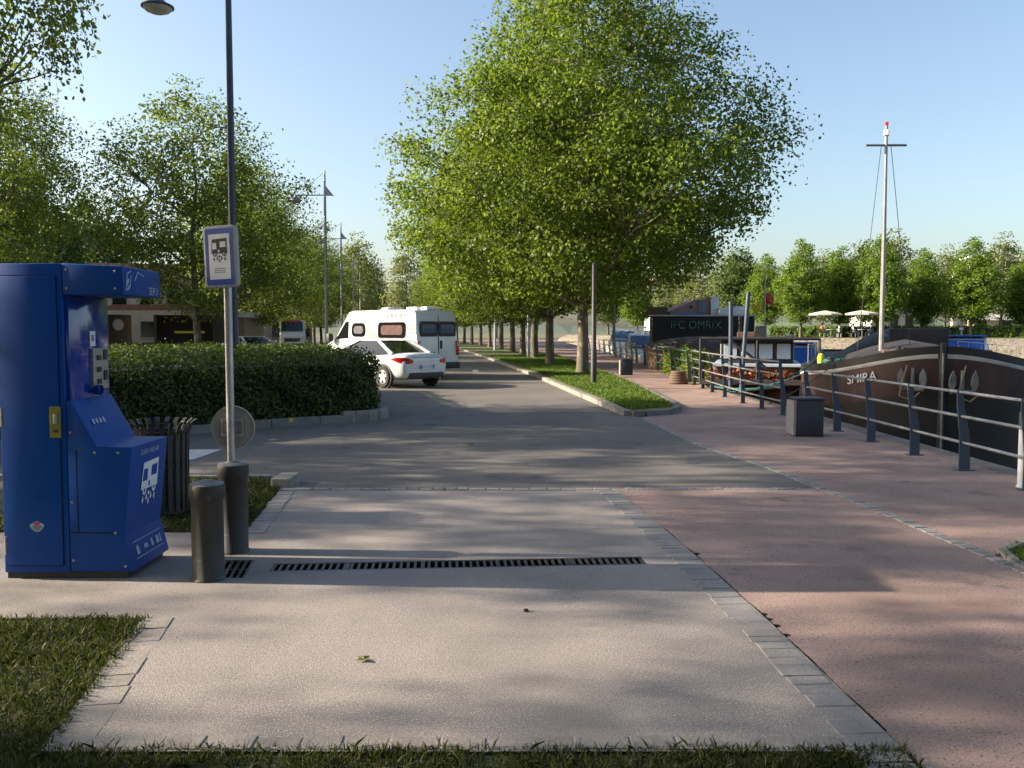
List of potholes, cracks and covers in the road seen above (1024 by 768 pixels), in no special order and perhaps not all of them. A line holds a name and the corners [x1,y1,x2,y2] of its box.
drain grate [225,560,255,578]
